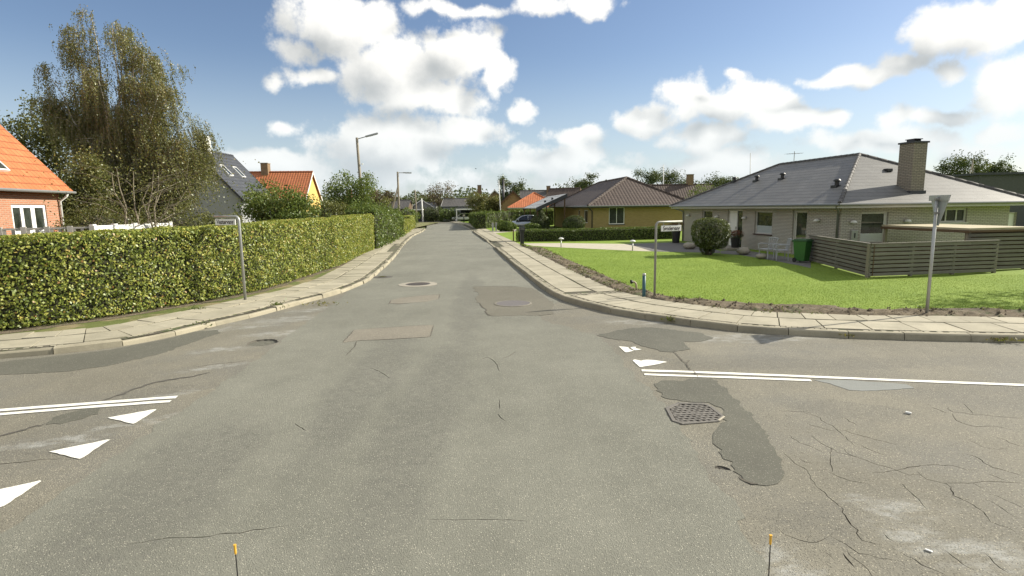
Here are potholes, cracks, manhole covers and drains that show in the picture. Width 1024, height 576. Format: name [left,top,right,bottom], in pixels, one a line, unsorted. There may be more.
crack [343,325,434,375]
crack [132,525,287,544]
drain grate [665,402,725,425]
crack [776,404,1023,576]
